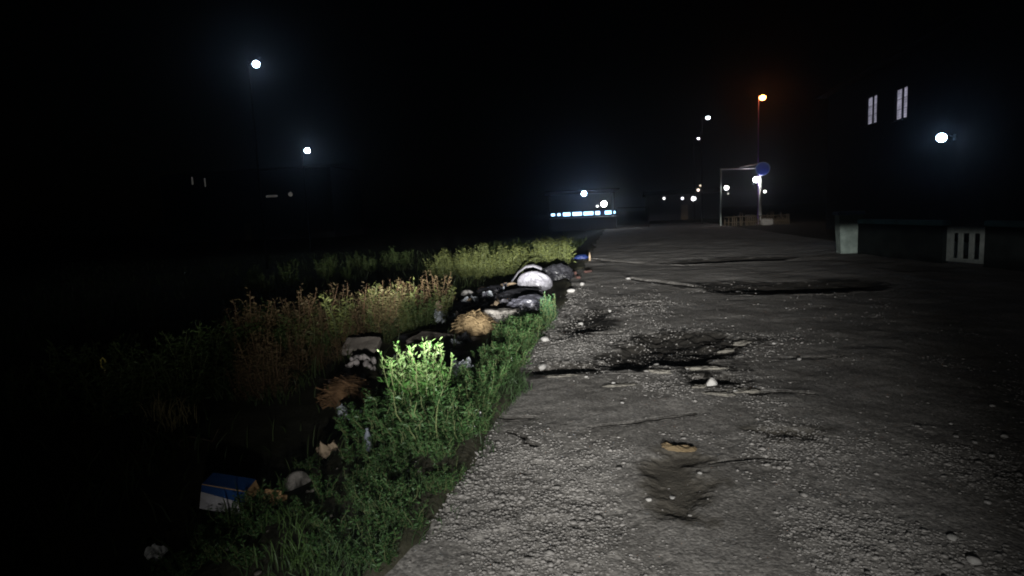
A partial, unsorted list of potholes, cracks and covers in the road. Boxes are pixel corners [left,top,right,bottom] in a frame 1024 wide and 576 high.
pothole [582,327,786,385]
crack [707,455,789,465]
pothole [548,307,631,337]
pothole [626,442,746,531]
crack [586,413,698,429]
pothole [677,279,909,298]
pothole [667,369,767,393]
crack [496,416,541,448]
